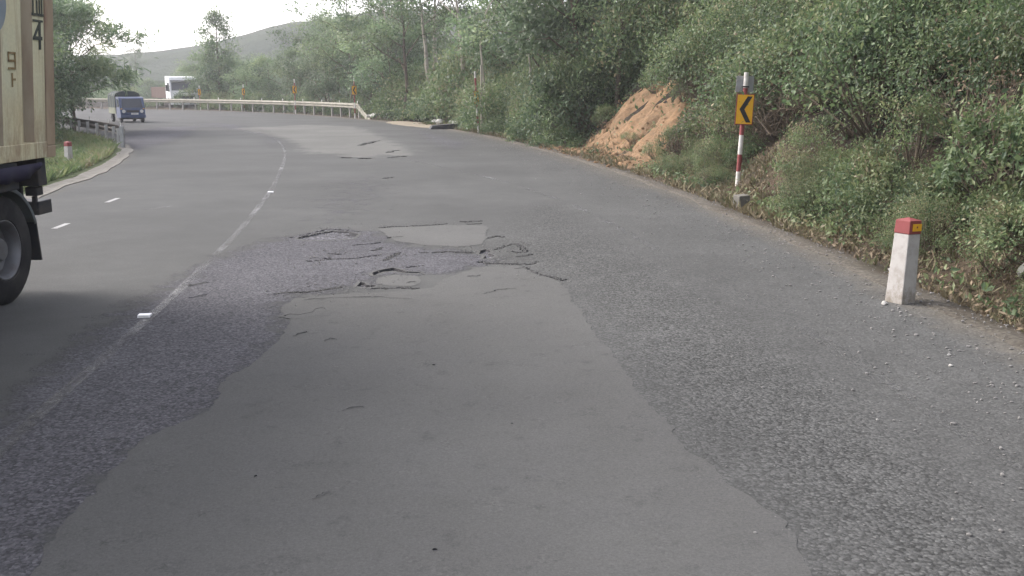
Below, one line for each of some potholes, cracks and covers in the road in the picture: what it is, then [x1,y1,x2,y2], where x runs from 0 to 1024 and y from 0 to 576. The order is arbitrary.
crack [275,221,565,300]
